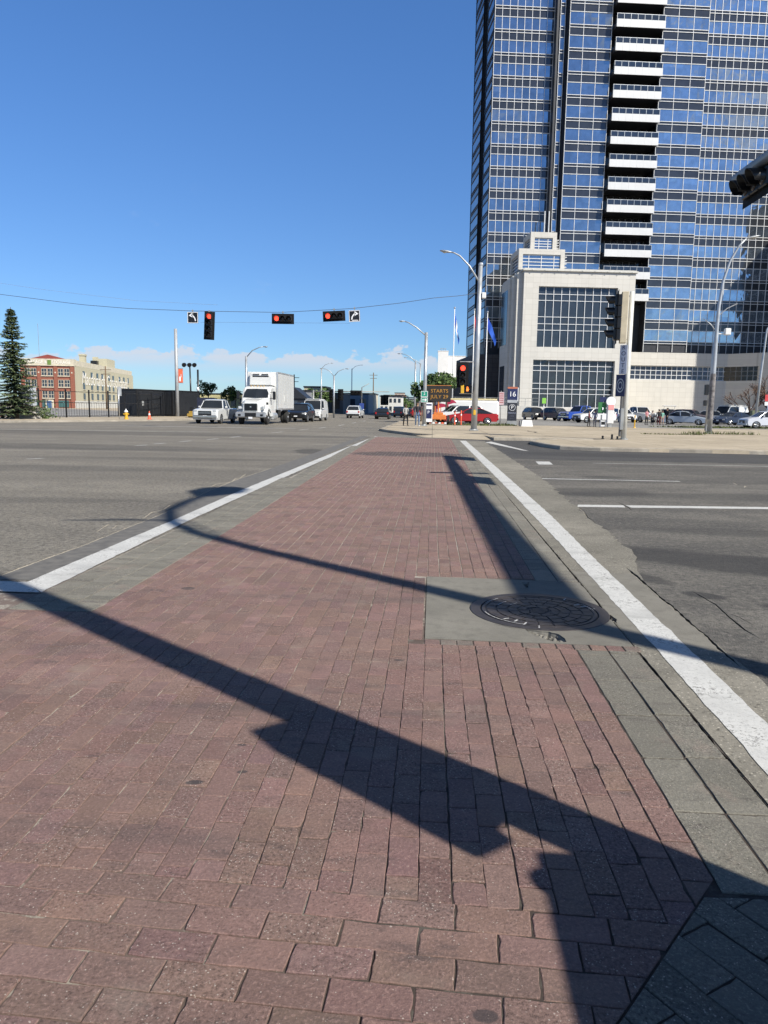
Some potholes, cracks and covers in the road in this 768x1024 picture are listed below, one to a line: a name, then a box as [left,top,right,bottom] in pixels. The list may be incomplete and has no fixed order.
manhole cover [470,593,610,631]
crack [630,571,753,662]
